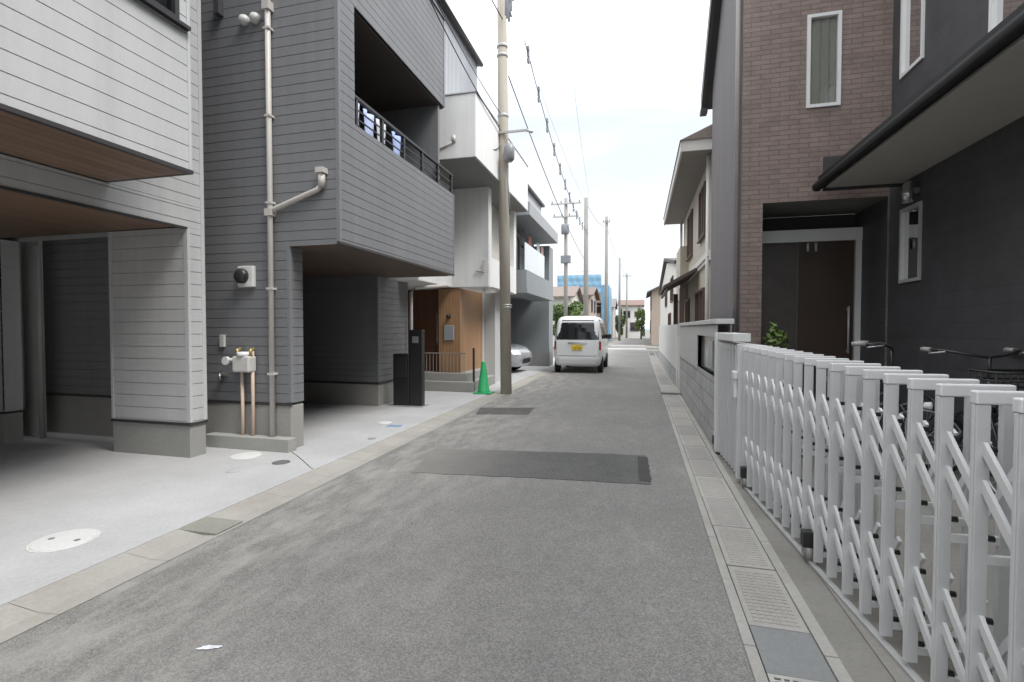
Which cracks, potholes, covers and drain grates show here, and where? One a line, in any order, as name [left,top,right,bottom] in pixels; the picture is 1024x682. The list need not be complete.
manhole cover [230,452,262,460]
manhole cover [25,528,101,553]
drain grate [767,673,820,682]
